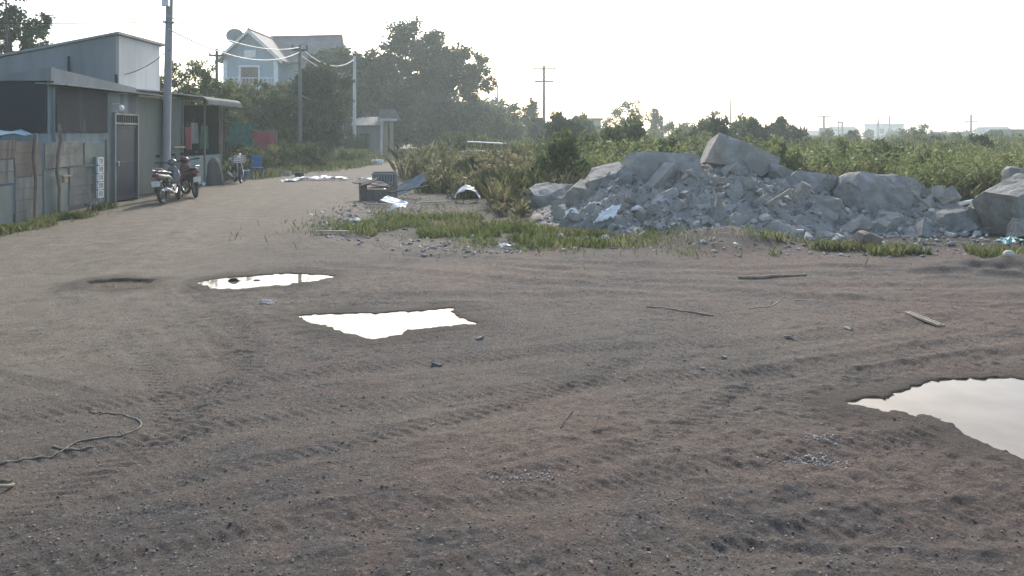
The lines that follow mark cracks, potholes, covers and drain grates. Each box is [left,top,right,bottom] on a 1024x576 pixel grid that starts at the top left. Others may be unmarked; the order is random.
pothole [184,270,350,292]
pothole [817,370,1024,470]
pothole [70,275,170,292]
pothole [276,303,491,345]
